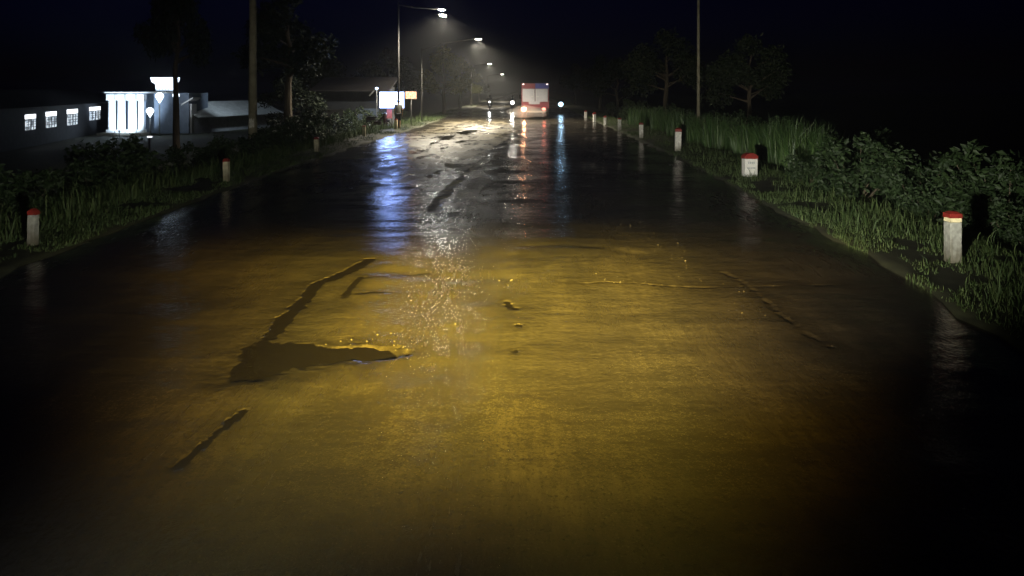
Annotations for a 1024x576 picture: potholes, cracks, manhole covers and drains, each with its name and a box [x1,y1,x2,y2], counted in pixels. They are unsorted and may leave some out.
crack [424,133,521,213]
pothole [502,301,523,311]
crack [577,272,850,348]
pothole [200,340,421,392]
crack [260,258,431,340]
